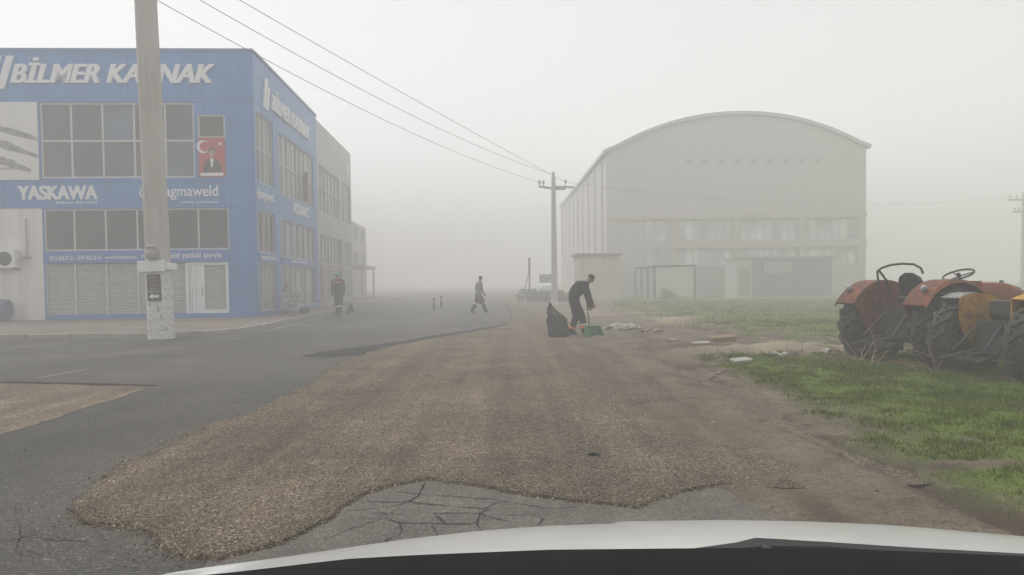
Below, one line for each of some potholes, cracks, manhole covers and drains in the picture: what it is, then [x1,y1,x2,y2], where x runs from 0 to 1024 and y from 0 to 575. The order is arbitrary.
crack [323,483,578,542]
crack [4,505,79,559]
